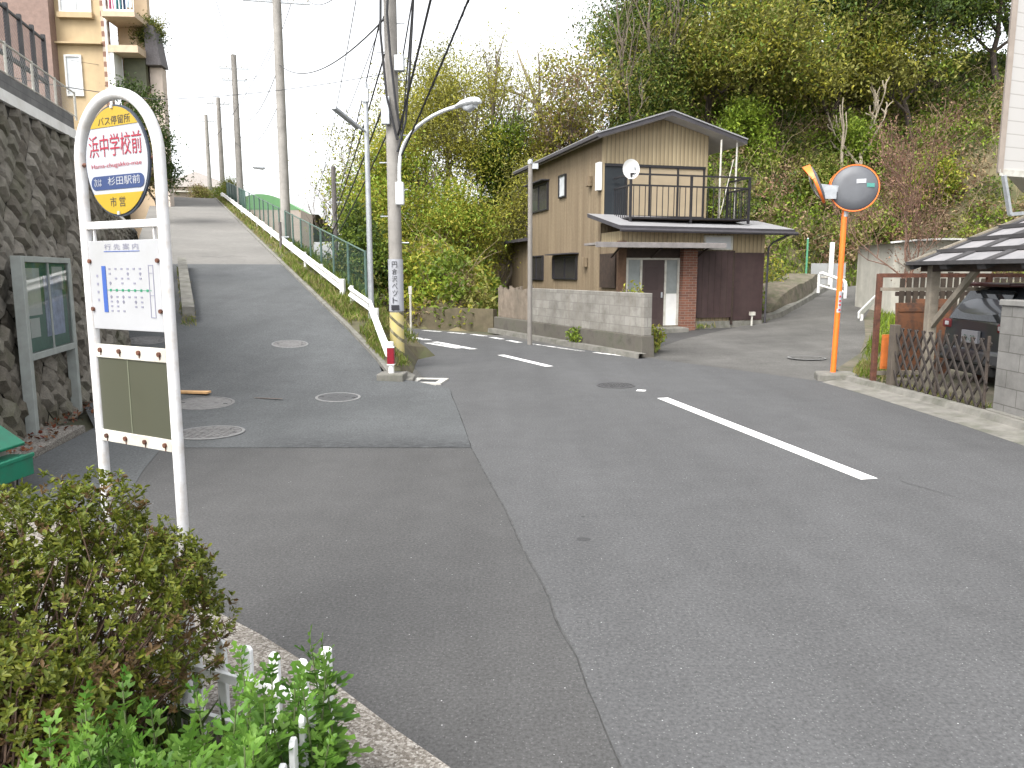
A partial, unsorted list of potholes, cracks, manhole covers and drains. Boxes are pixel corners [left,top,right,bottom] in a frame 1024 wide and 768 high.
manhole cover [181,397,235,410]
manhole cover [315,392,361,402]
manhole cover [271,340,308,348]
manhole cover [183,425,245,440]
